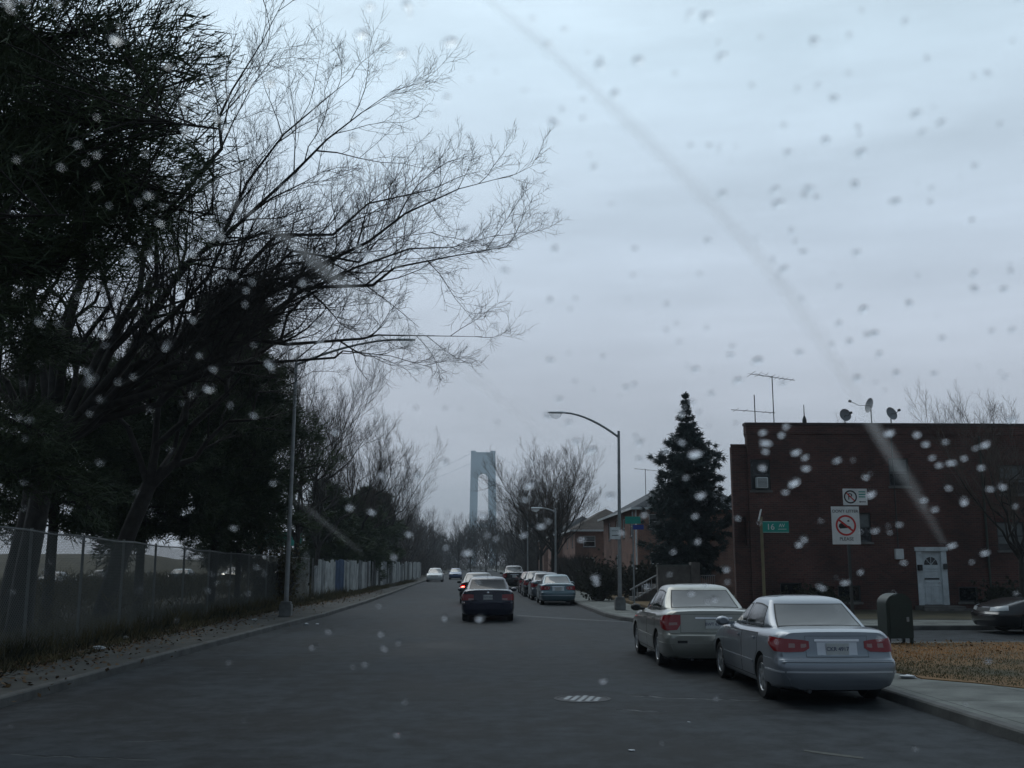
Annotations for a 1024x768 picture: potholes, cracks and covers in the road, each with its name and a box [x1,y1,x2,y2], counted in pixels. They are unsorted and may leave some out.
manhole cover [554,695,611,703]
